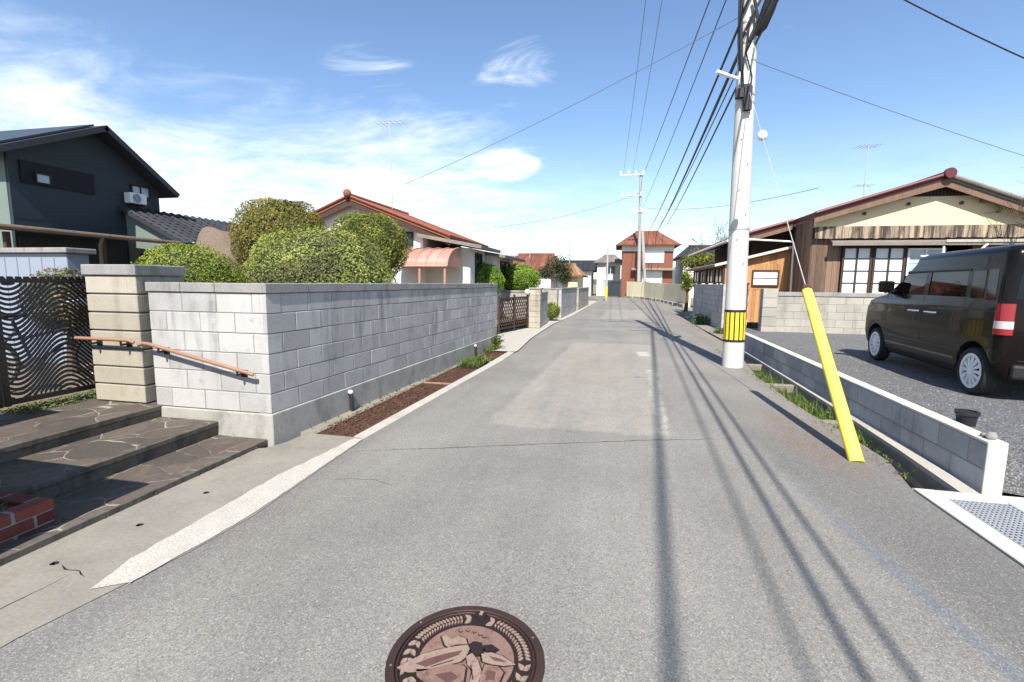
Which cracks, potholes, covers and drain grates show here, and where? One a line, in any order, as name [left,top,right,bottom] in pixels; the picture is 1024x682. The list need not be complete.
crack [367,439,701,451]
manhole cover [385,606,545,682]
drain grate [949,499,1024,548]
crack [1,564,84,609]
